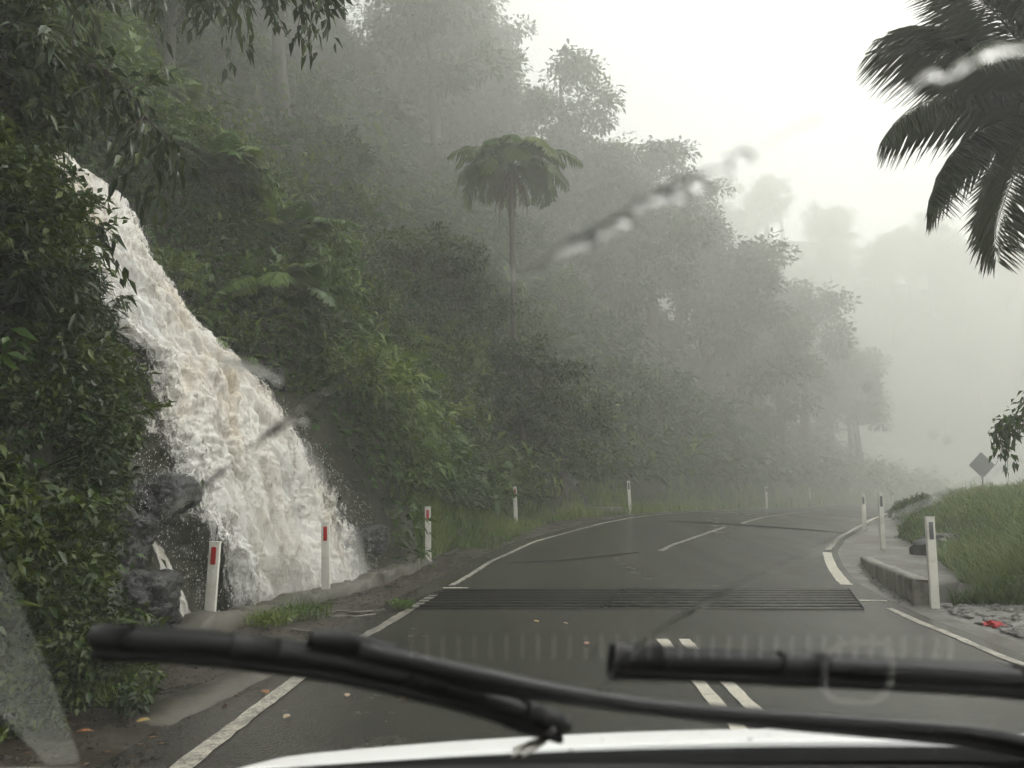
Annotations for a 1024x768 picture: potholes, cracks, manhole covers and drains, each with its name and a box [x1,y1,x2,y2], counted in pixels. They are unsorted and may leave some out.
drain grate [398,589,864,610]
